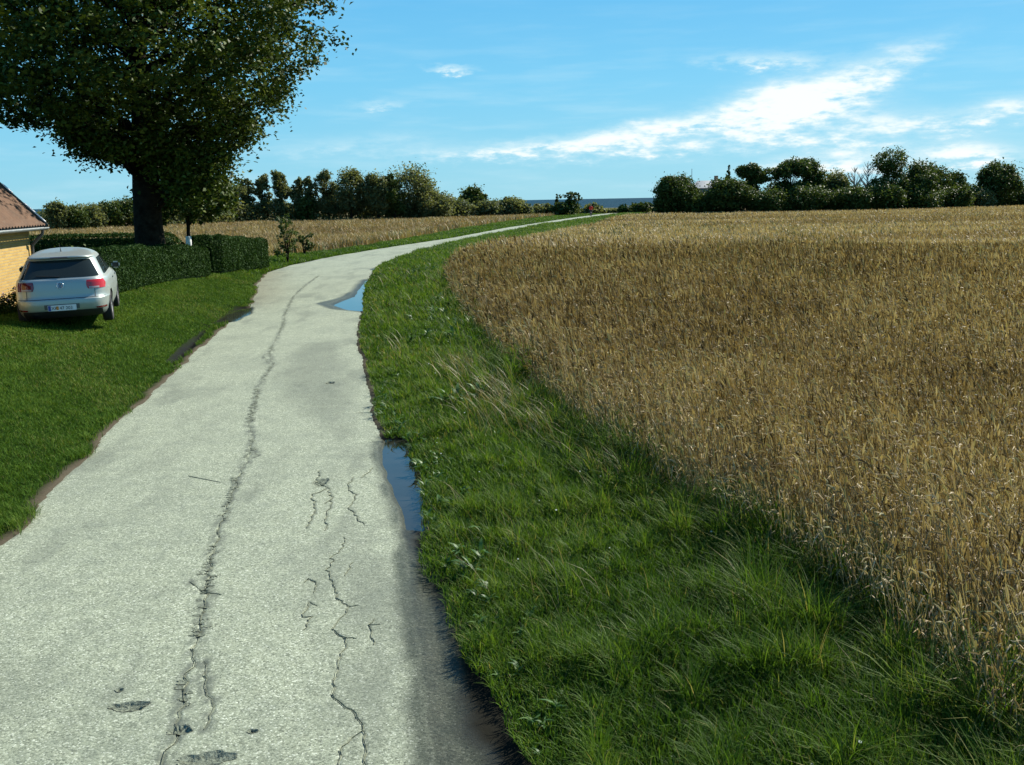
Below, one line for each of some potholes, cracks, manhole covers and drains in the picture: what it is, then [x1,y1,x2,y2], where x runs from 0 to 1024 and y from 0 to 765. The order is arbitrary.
pothole [177,750,237,765]
pothole [108,701,150,712]
crack [302,468,380,765]
pothole [166,724,193,735]
crack [161,276,318,763]
